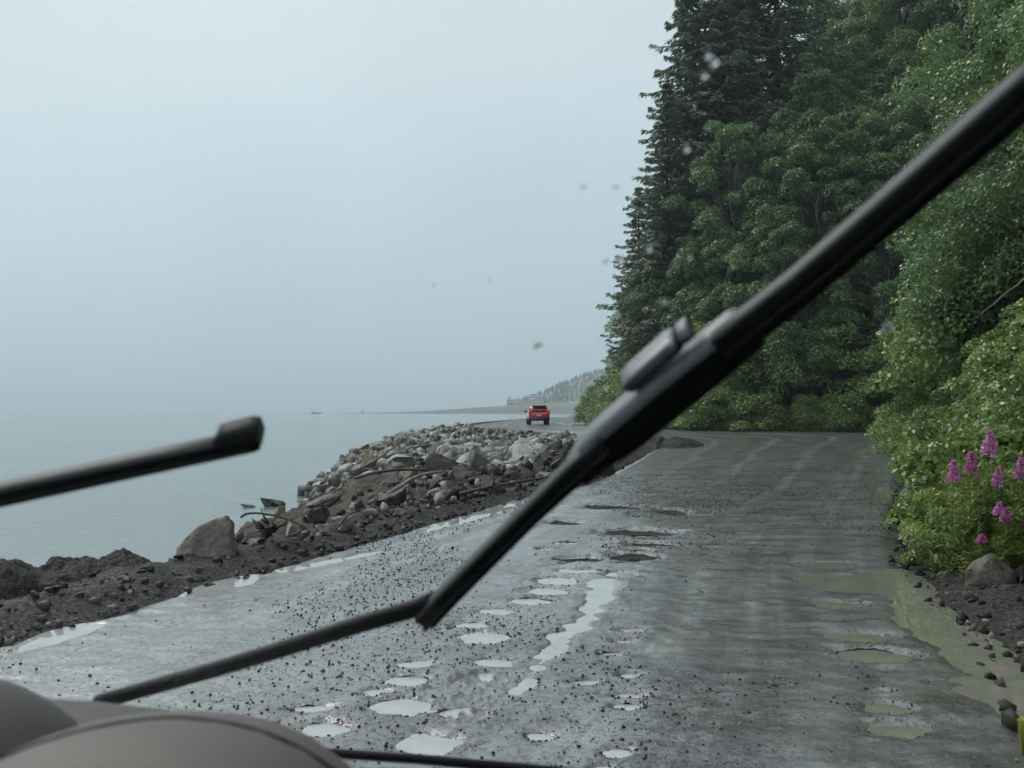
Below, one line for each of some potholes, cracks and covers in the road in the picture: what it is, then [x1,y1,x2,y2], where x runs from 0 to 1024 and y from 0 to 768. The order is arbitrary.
pothole [601,529,679,537]
pothole [369,699,437,717]
pothole [473,659,513,667]
pothole [396,734,465,756]
pothole [385,675,429,686]
pothole [864,704,912,715]
pothole [865,724,928,739]
pothole [457,632,512,645]
pothole [835,648,912,663]
pothole [608,553,658,562]
